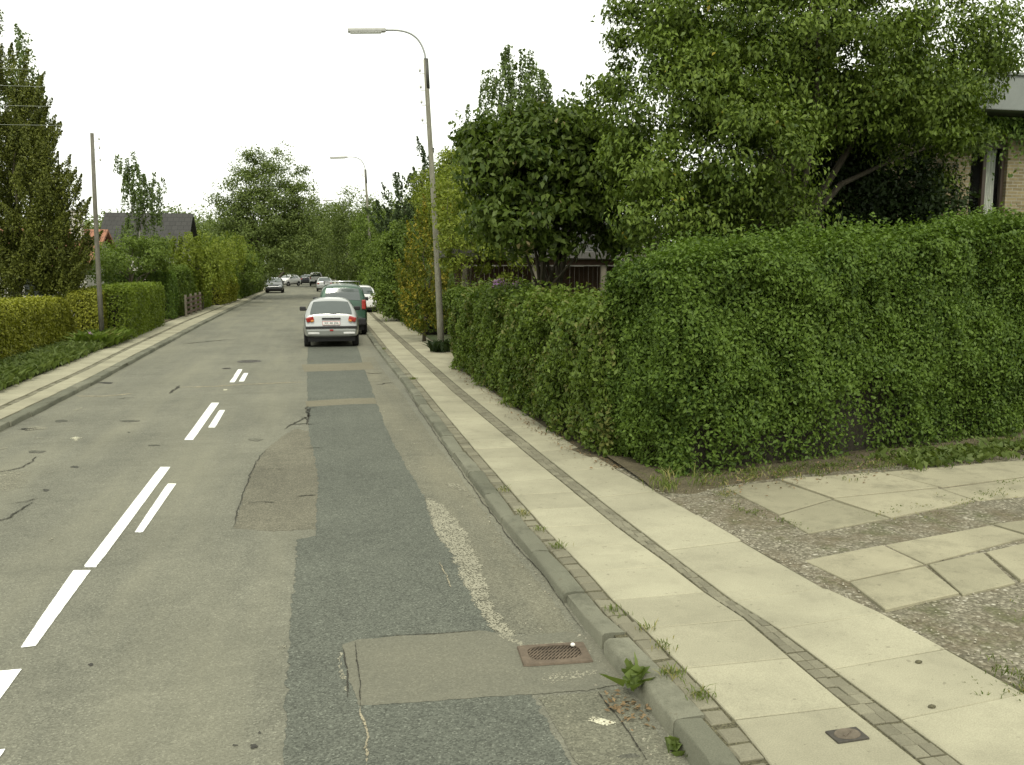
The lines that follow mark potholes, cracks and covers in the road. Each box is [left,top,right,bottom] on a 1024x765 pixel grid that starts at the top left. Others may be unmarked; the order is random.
crack [284,407,315,429]
crack [233,451,277,526]
drain grate [517,642,593,666]
crack [599,693,647,760]
utility cover [825,727,869,744]
